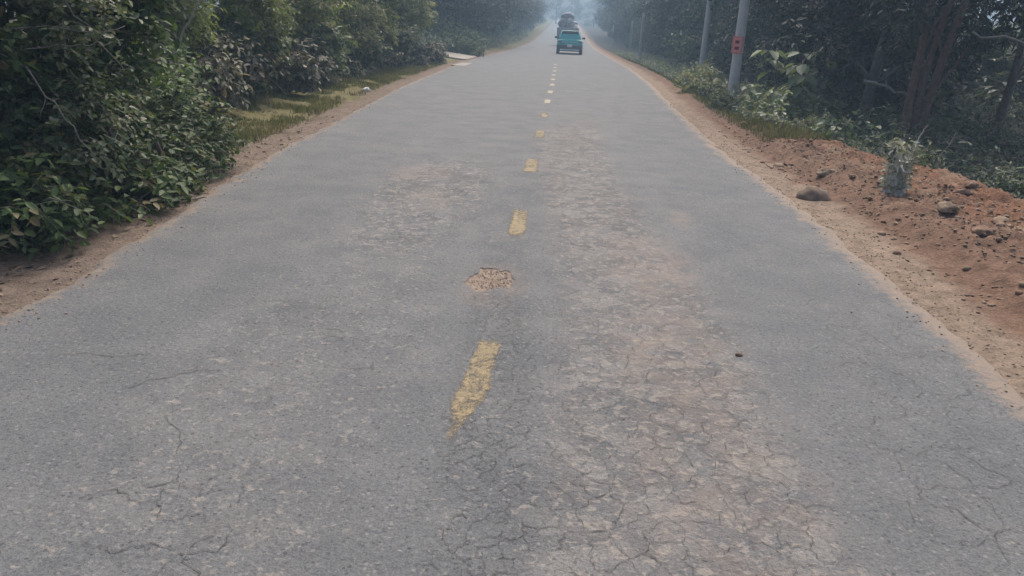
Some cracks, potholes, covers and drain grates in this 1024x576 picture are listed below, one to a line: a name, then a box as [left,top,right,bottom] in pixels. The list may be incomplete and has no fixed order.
crack [0,292,420,576]
crack [418,235,546,576]
crack [807,289,1024,576]
pothole [465,268,515,292]
